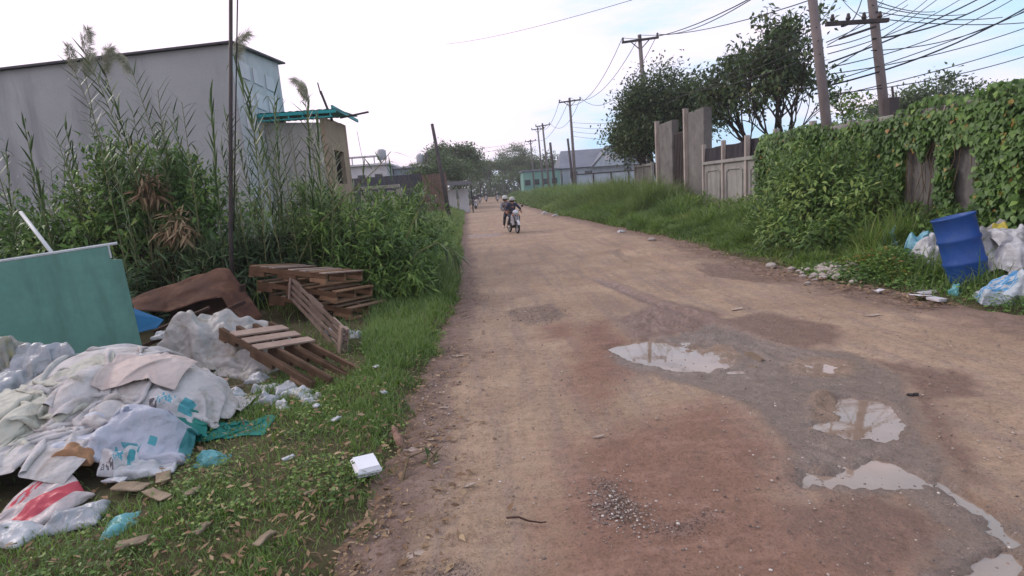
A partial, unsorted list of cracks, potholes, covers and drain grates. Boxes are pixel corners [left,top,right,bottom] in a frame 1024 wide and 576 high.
pothole [798,390,921,444]
pothole [911,473,1024,576]
pothole [778,454,940,493]
pothole [597,337,742,374]
